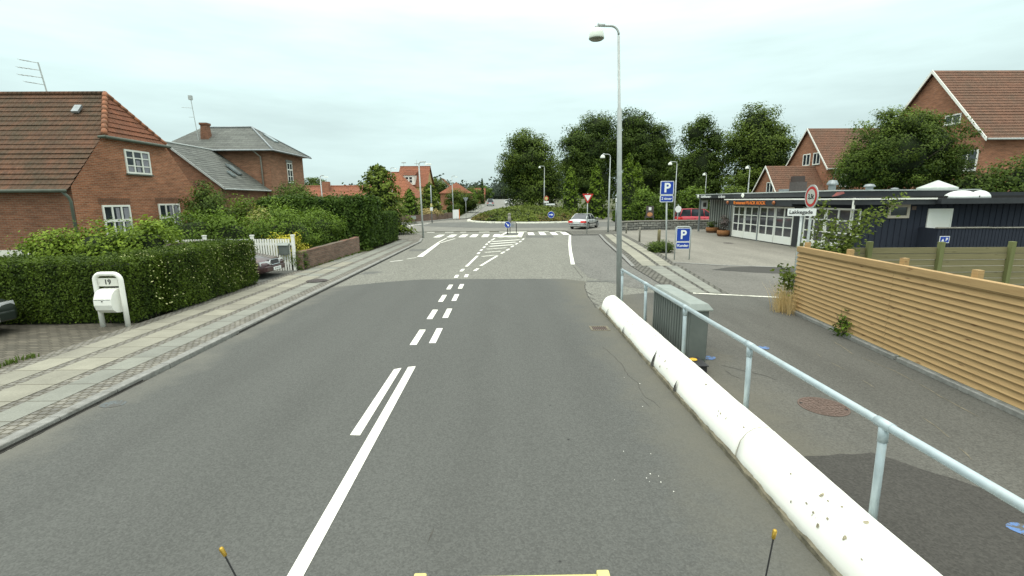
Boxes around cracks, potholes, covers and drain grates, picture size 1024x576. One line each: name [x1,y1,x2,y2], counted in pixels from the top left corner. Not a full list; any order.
manhole cover [797,397,851,417]
